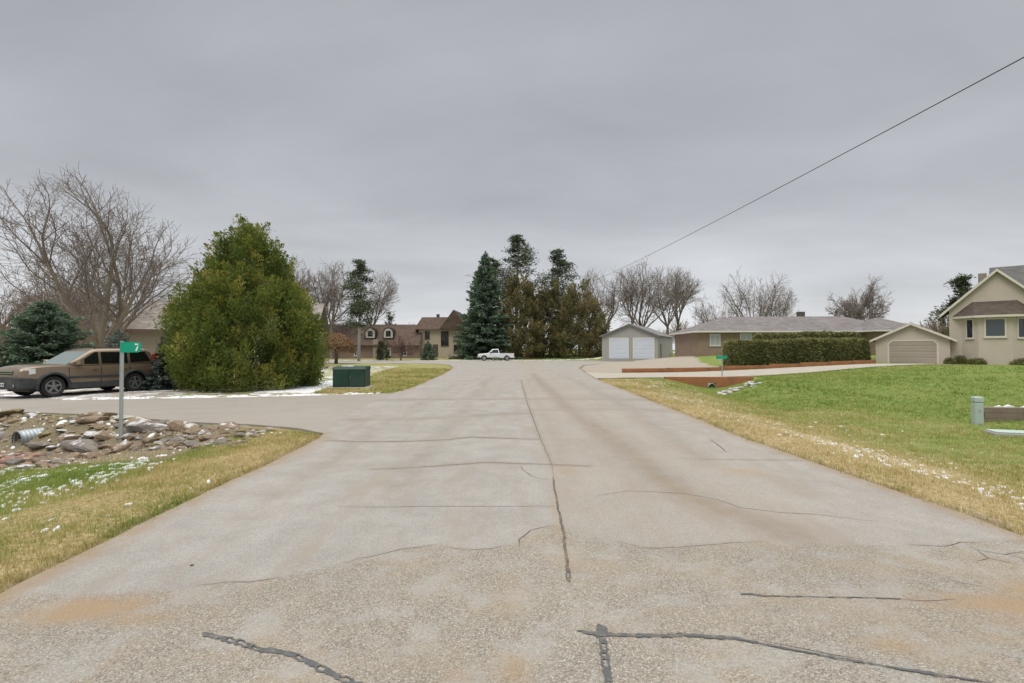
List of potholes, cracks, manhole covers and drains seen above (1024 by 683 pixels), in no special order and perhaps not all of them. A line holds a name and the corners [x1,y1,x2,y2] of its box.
crack [610,491,867,521]
crack [927,542,1022,563]
